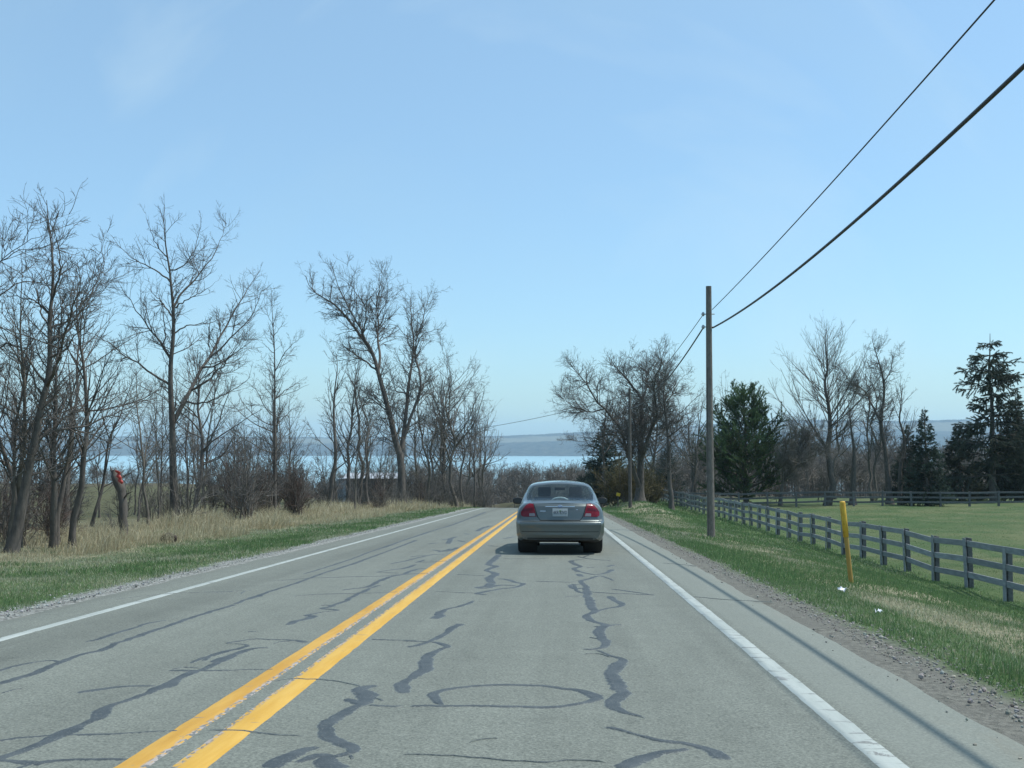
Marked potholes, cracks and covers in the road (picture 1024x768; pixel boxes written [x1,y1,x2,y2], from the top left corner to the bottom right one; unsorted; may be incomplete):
crack [274,678,360,687]
crack [0,729,302,742]
